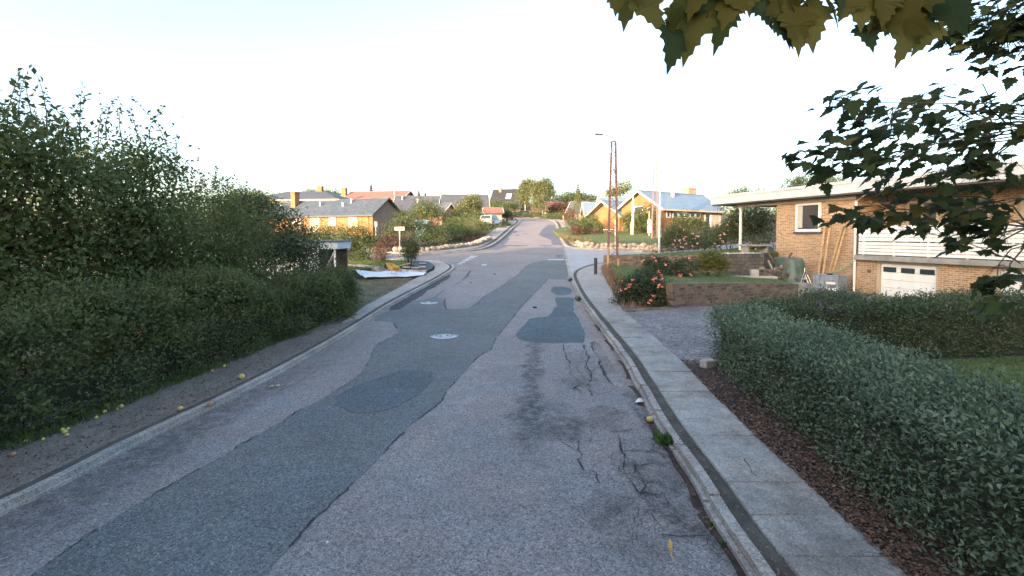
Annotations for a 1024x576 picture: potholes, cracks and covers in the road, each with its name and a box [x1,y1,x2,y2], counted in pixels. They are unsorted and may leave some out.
crack [553,420,689,547]
crack [563,344,617,400]
